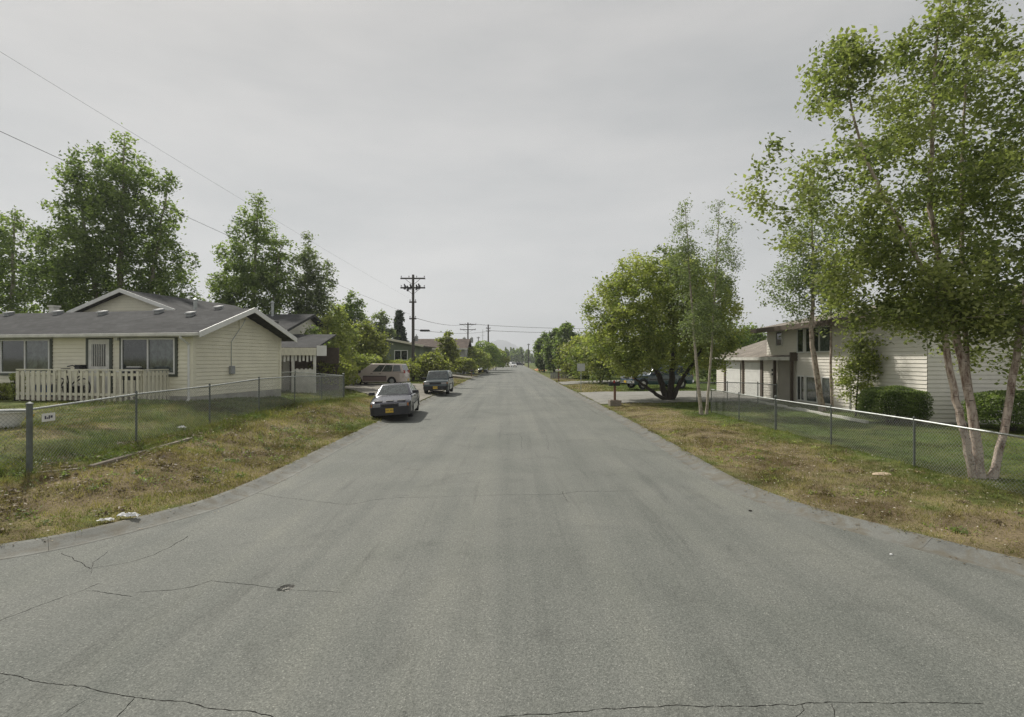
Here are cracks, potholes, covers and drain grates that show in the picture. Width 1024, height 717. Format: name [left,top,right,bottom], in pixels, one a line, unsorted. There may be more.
crack [0,673,273,717]
crack [2,536,340,620]
